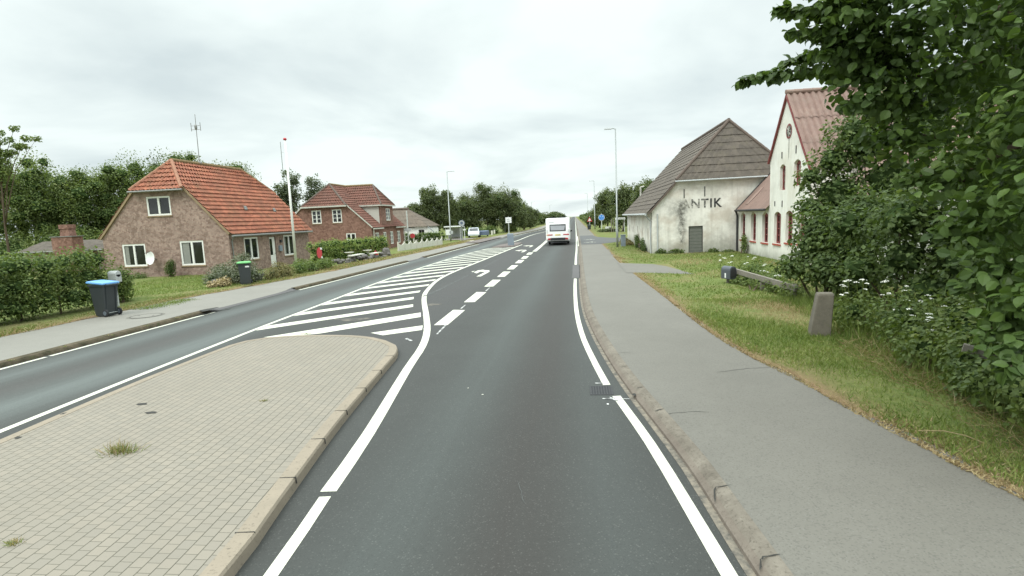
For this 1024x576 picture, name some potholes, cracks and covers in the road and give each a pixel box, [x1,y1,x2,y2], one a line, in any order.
drain grate [589,386,614,395]
